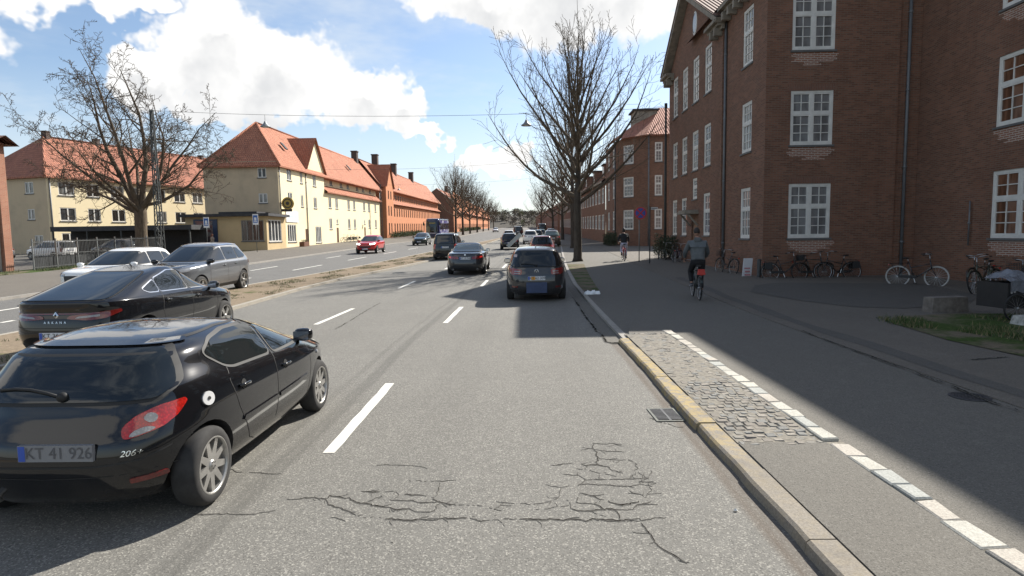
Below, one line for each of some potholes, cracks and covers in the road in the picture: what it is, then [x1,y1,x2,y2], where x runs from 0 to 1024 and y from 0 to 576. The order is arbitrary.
crack [572,297,619,344]
drain grate [646,408,686,422]
crack [191,443,686,563]
